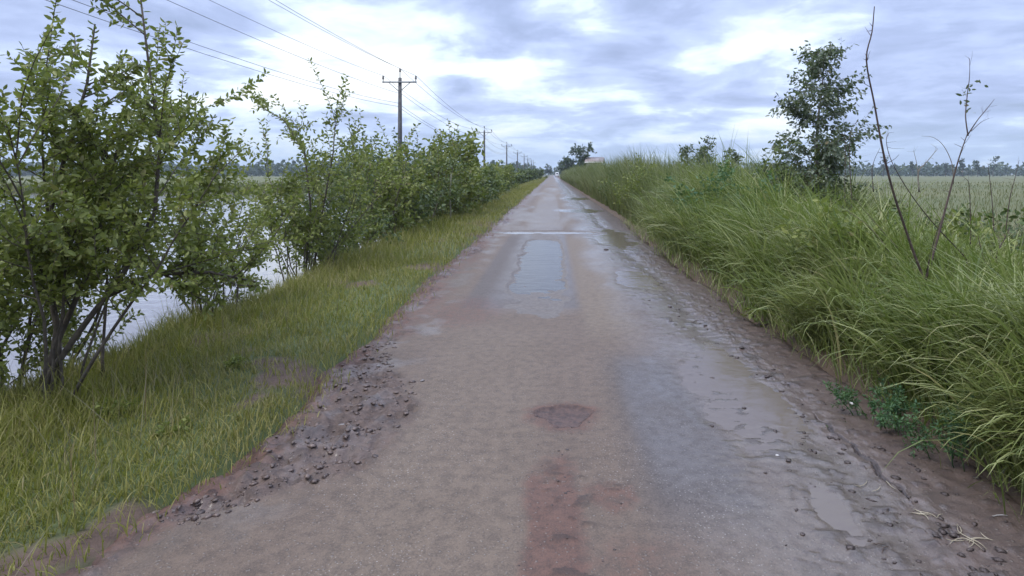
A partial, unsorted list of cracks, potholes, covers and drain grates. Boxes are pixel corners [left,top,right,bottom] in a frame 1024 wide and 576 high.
pothole [502,233,572,319]
